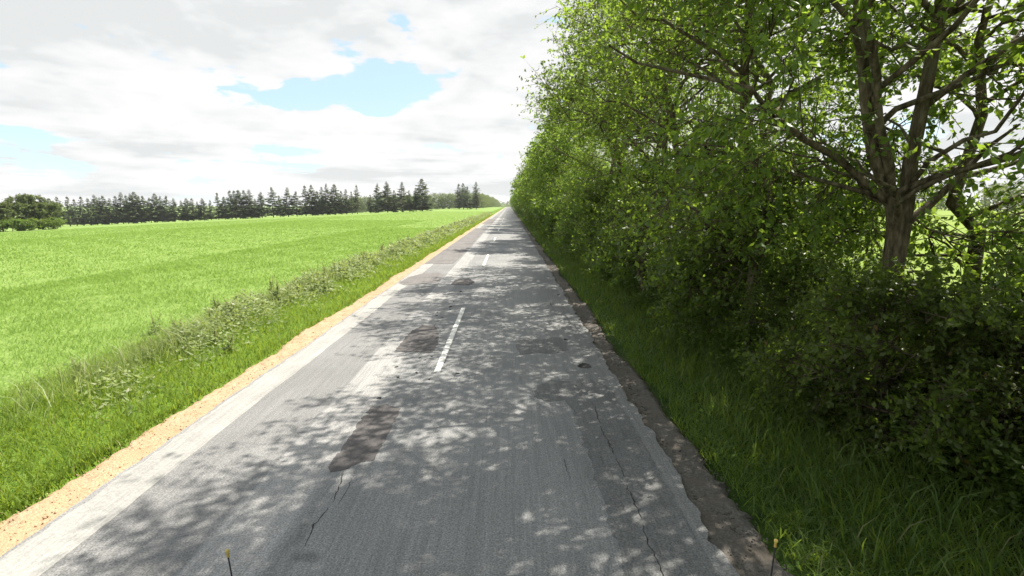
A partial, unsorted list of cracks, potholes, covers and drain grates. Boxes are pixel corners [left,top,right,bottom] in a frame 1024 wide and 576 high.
crack [305,471,351,546]
crack [595,409,664,576]
